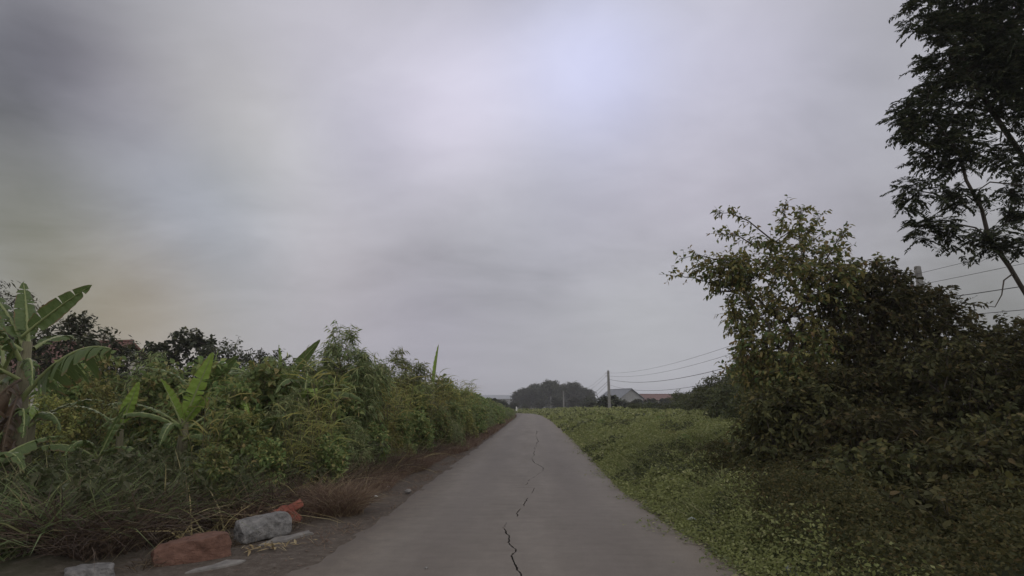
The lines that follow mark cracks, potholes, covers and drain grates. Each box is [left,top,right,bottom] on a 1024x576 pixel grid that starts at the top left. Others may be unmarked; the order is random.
crack [504,439,539,576]
